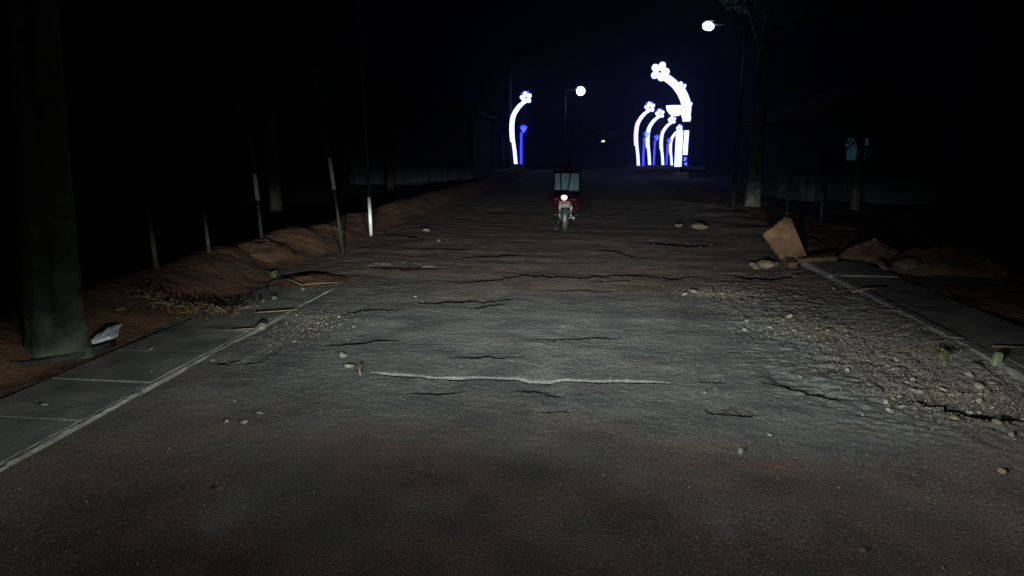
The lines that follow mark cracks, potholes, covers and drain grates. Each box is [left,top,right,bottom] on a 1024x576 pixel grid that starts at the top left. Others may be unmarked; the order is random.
crack [323,274,714,319]
crack [762,381,846,401]
crack [370,337,670,413]
